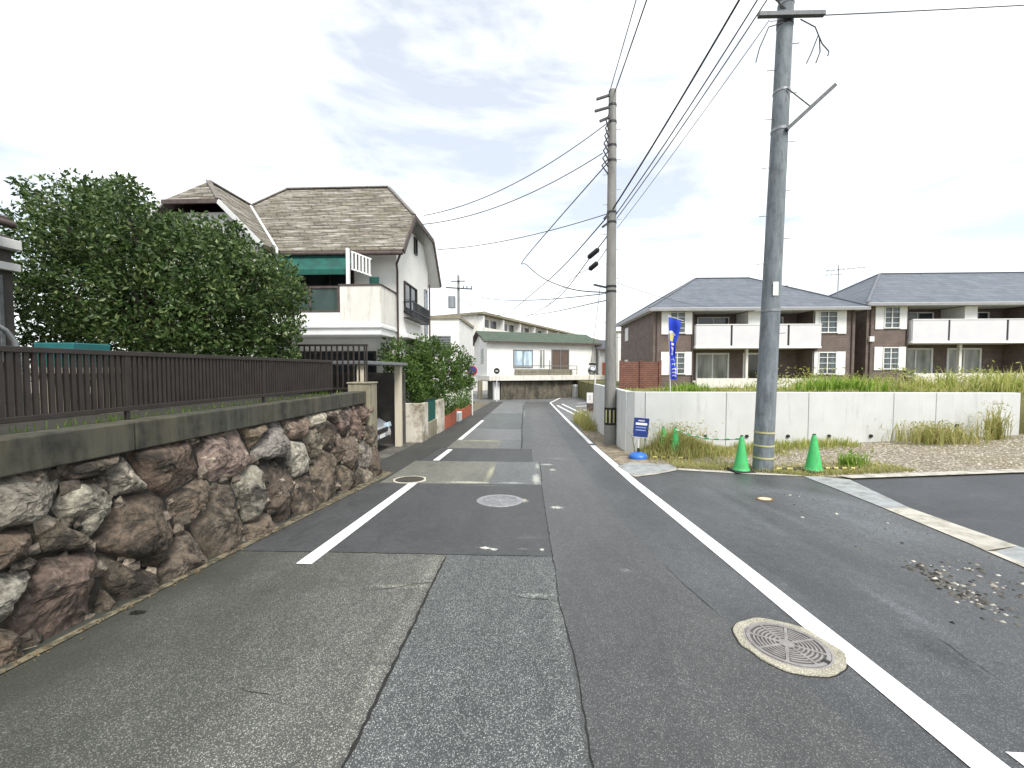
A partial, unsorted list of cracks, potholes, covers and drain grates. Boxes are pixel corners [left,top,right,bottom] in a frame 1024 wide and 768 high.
manhole cover [477,494,523,507]
manhole cover [392,476,427,484]
manhole cover [731,618,848,678]
